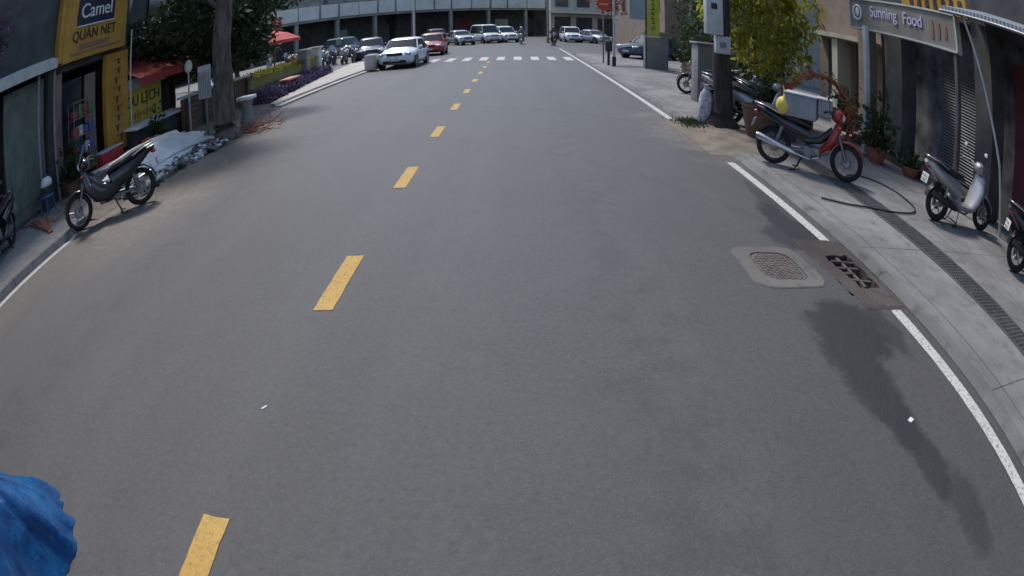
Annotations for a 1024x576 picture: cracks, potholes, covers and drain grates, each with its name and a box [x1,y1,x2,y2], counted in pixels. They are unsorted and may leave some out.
manhole cover [731,246,825,289]
drain grate [792,239,906,310]
